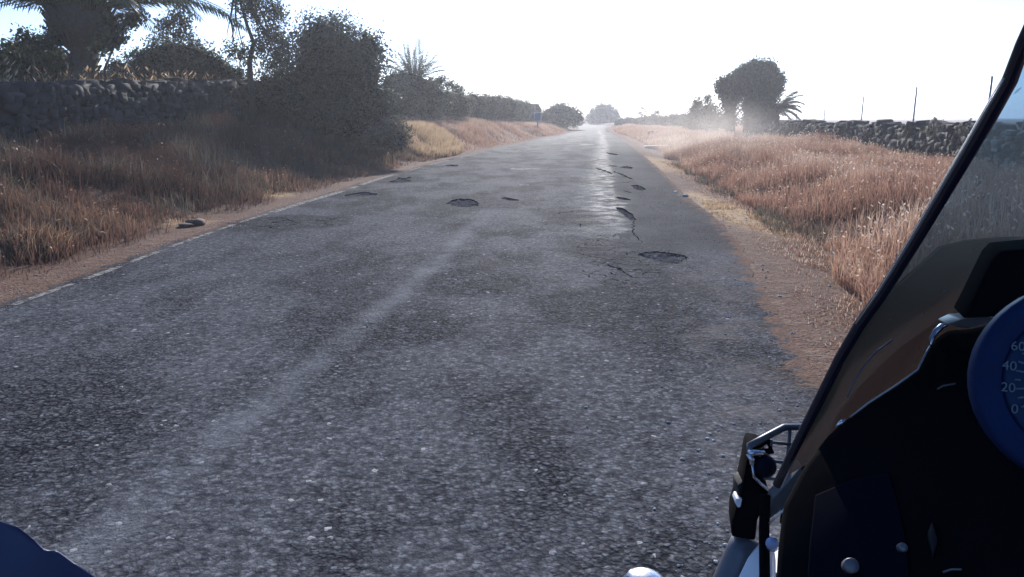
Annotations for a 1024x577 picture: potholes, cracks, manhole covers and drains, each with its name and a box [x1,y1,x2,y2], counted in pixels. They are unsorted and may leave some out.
crack [572,220,664,288]
pothole [616,207,636,220]
pothole [446,198,479,207]
pothole [637,251,687,264]
